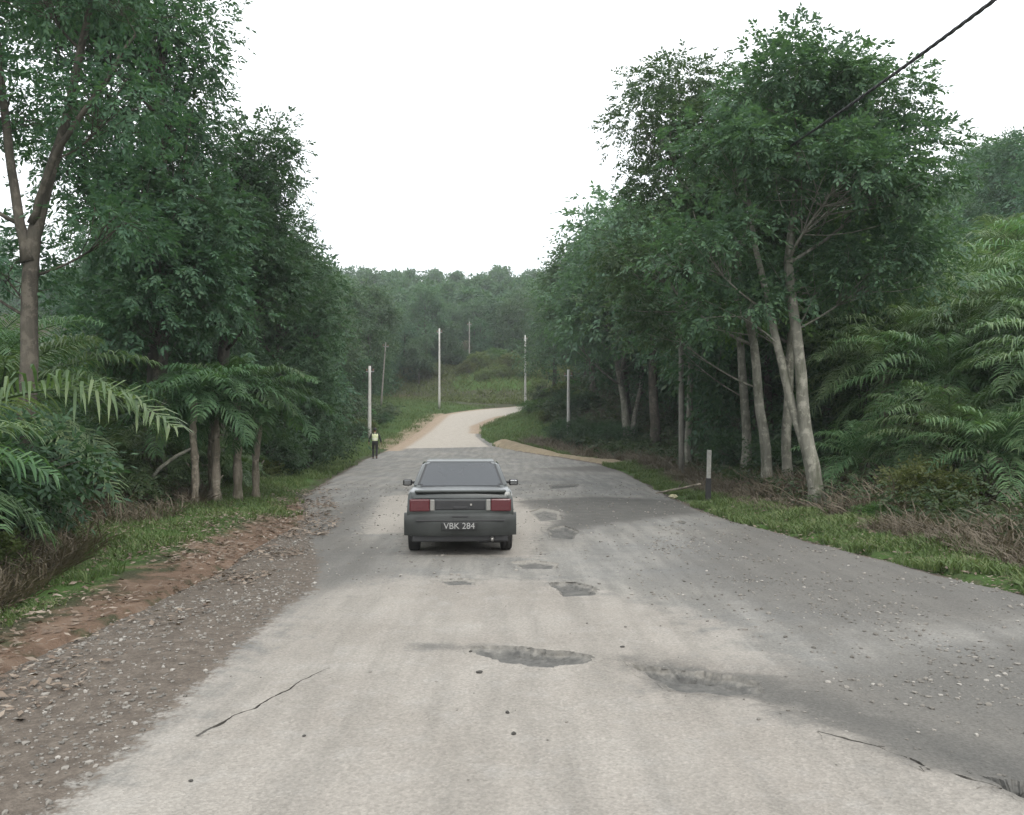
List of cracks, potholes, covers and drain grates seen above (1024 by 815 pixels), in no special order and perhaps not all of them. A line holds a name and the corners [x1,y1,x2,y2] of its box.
crack [193,668,335,736]
pothole [430,577,488,587]
pothole [541,525,585,540]
pothole [623,660,775,698]
crack [817,730,1002,789]
pothole [505,559,566,570]
pothole [526,507,566,522]
pothole [543,580,607,598]
pothole [462,644,604,670]
